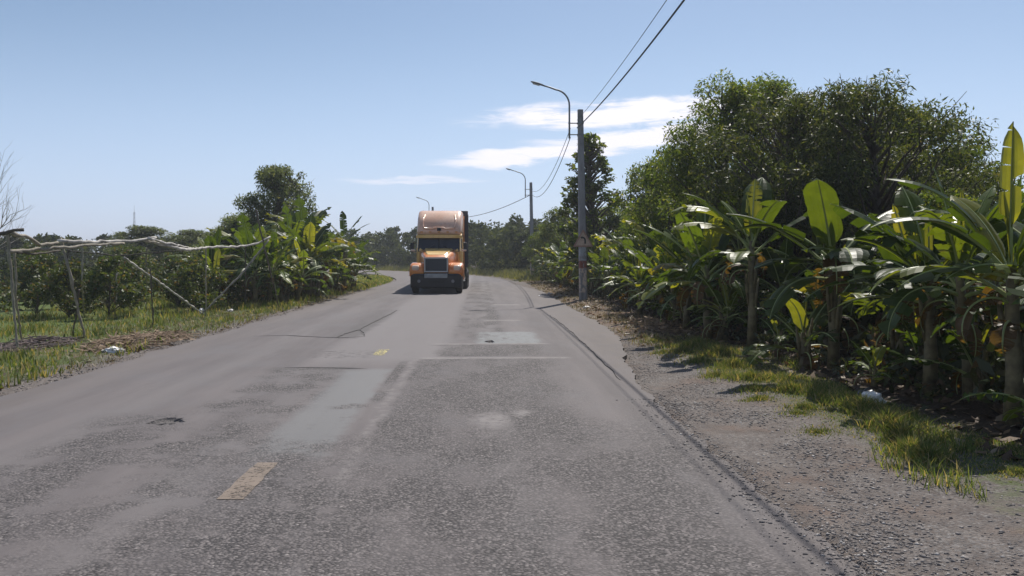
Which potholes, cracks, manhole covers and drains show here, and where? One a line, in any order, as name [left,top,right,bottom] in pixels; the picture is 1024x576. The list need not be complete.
pothole [147,418,185,426]
